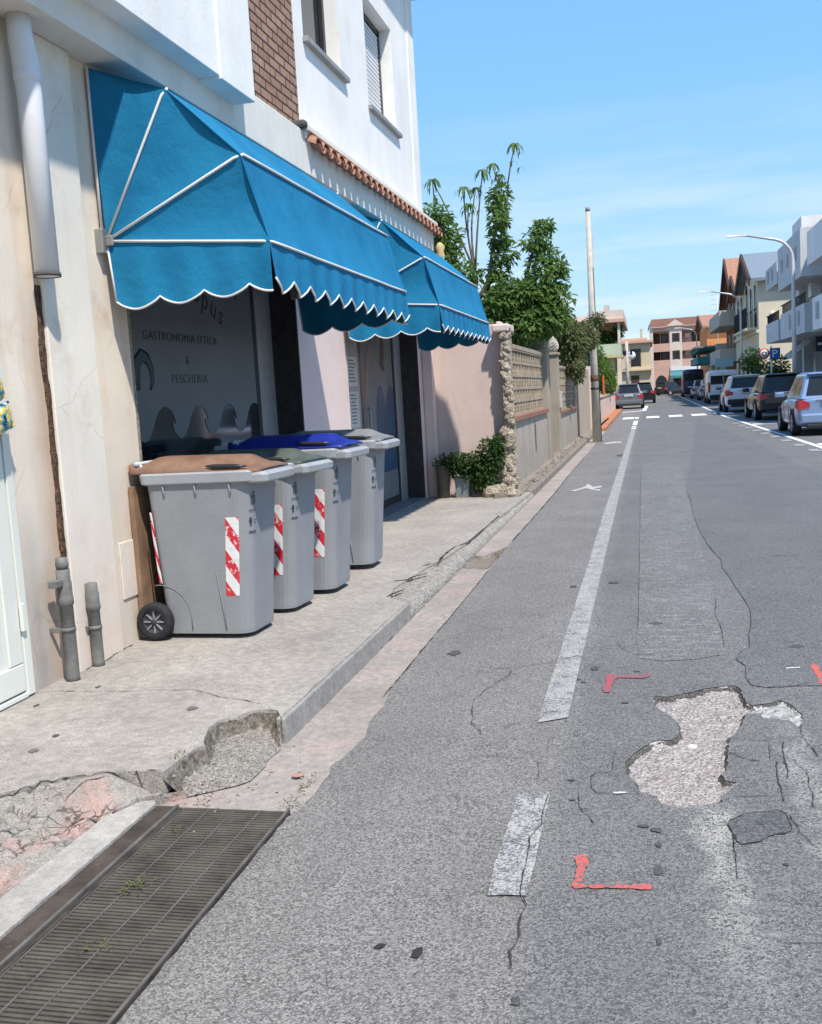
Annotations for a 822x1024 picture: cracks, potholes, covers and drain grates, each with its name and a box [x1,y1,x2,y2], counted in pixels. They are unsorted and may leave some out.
crack [471,662,546,733]
pothole [625,686,804,808]
crack [689,496,763,687]
drain grate [0,804,294,1024]
crack [506,756,551,968]
crack [724,728,821,880]
